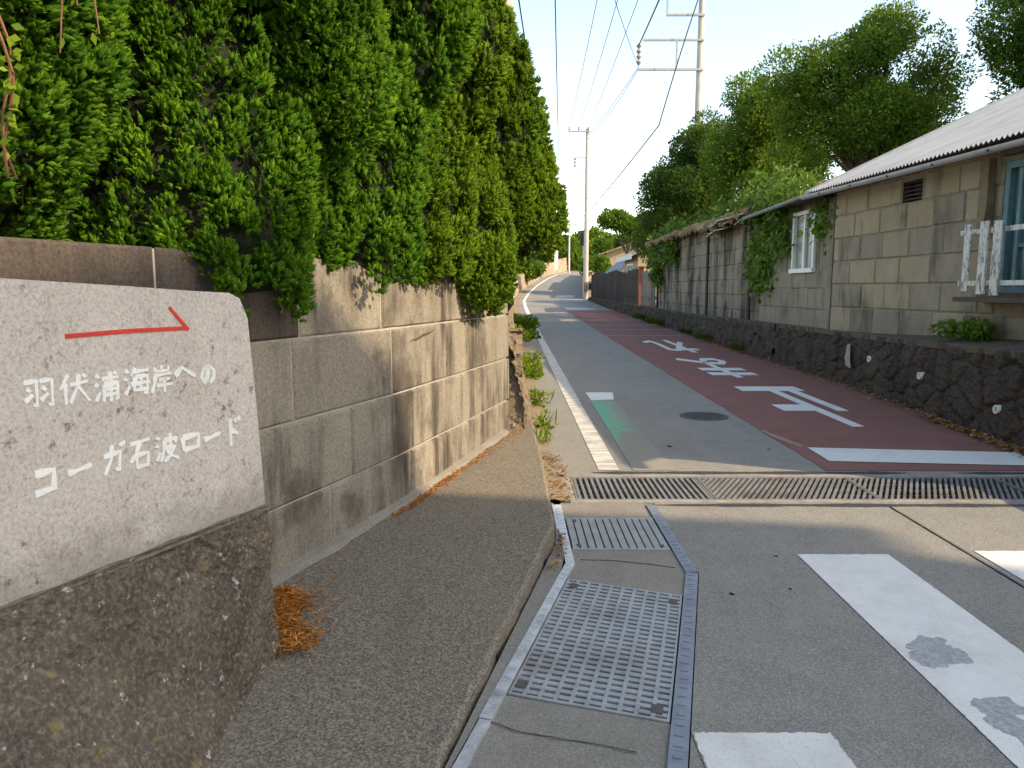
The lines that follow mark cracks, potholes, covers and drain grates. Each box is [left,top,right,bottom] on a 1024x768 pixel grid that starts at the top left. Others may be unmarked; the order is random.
crack [491,721,637,752]
crack [580,559,675,568]
drain grate [696,477,882,500]
drain grate [508,579,682,724]
drain grate [565,518,671,550]
drain grate [992,477,1024,490]
manhole cover [679,412,729,421]
drain grate [570,477,716,500]
